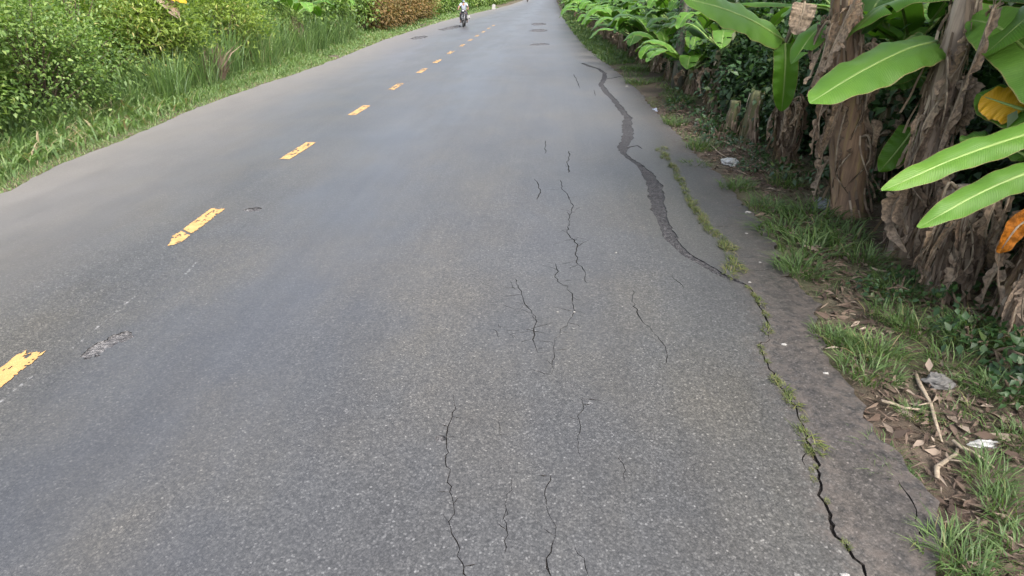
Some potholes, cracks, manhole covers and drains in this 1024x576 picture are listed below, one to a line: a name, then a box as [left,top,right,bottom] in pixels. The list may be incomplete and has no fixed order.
crack [495,63,773,453]
pothole [80,331,134,359]
crack [898,480,923,538]
crack [499,472,520,552]
crack [539,475,556,576]
crack [433,395,475,576]
